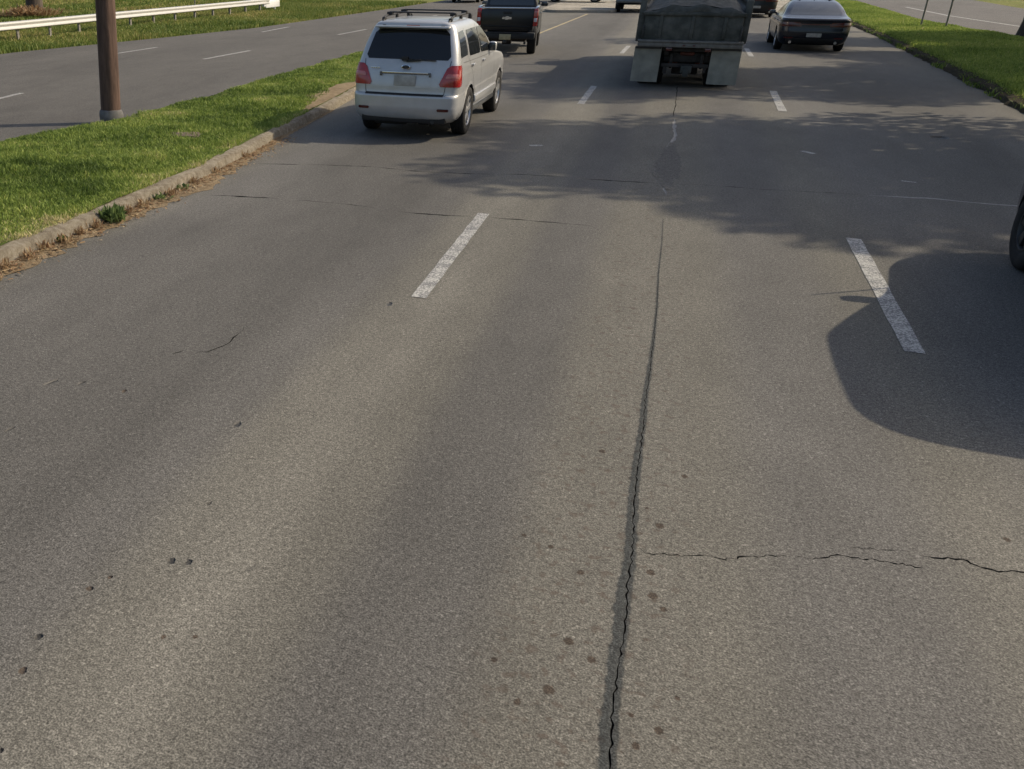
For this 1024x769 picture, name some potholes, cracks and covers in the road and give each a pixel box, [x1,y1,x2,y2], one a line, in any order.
crack [798,546,1024,573]
crack [667,87,678,146]
crack [711,185,1017,206]
crack [641,549,776,561]
